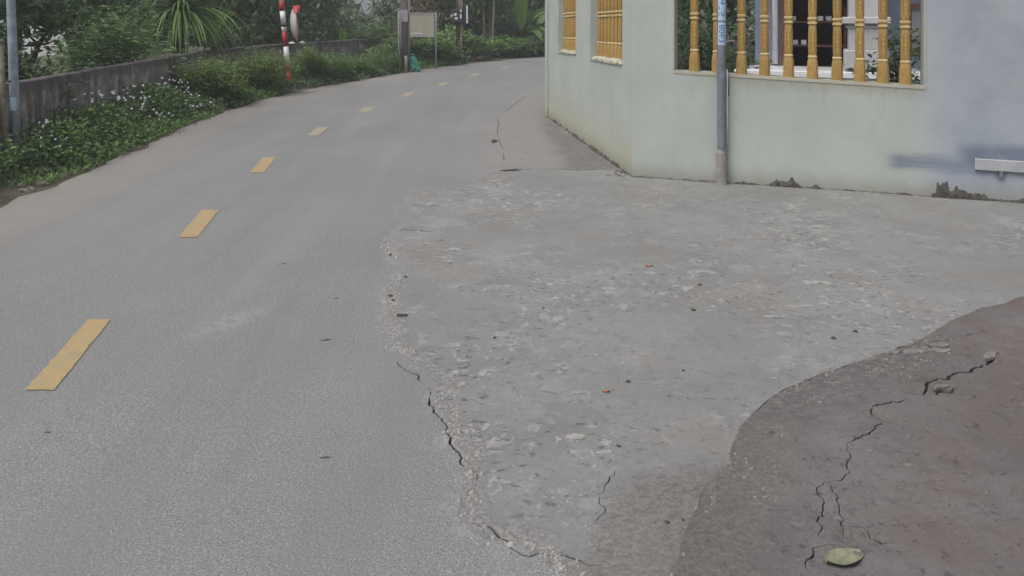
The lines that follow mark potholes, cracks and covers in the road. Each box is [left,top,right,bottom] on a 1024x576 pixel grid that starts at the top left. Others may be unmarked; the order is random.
crack [397,362,478,482]
crack [480,526,586,565]
crack [923,353,999,395]
crack [805,400,904,568]
